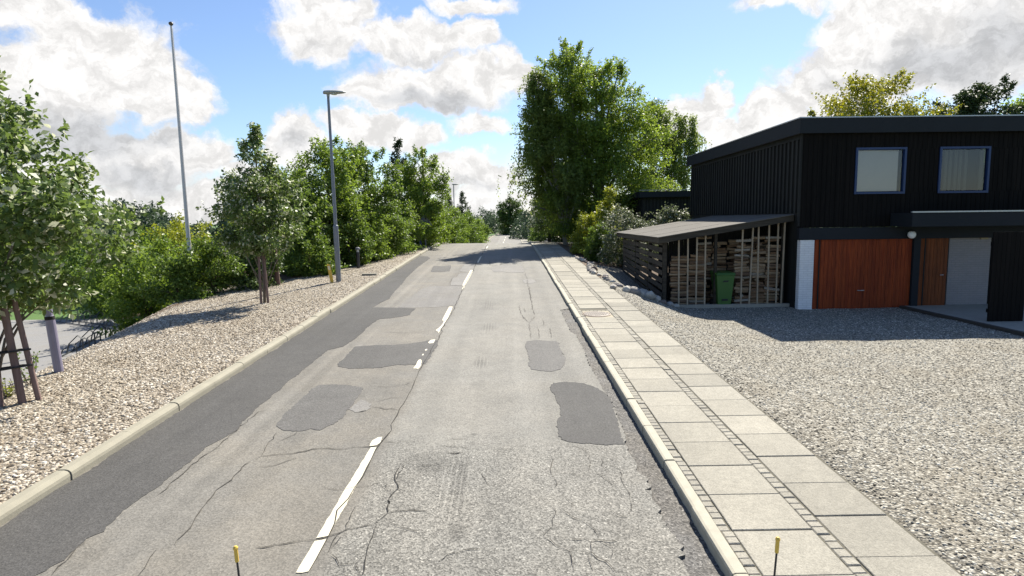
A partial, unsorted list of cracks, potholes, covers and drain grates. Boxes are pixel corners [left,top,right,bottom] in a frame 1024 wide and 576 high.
crack [159,244,515,573]
crack [544,446,632,573]
